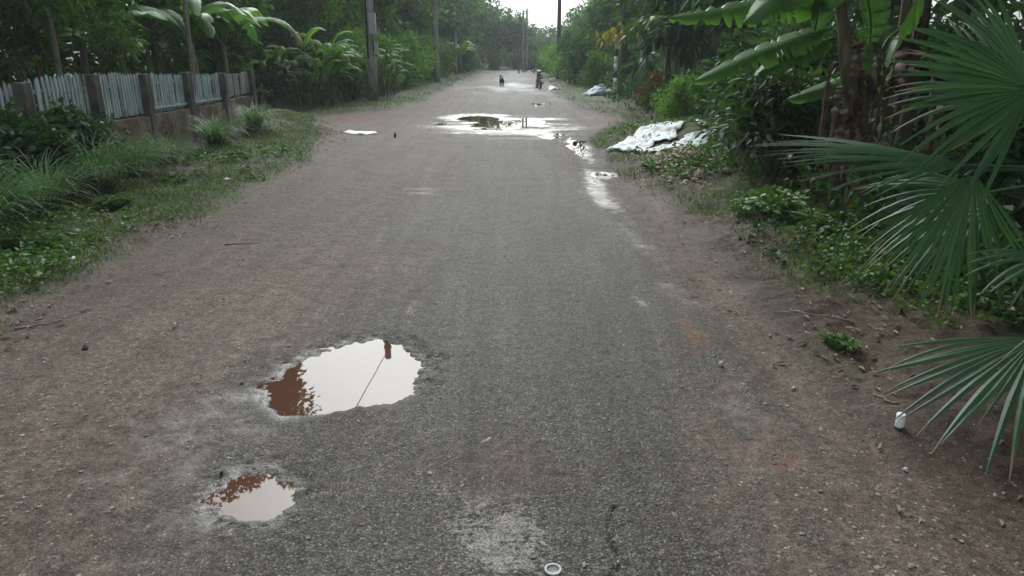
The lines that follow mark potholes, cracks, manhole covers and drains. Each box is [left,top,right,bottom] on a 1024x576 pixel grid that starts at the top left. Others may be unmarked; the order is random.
pothole [194,463,307,535]
crack [604,505,627,576]
pothole [257,338,431,416]
